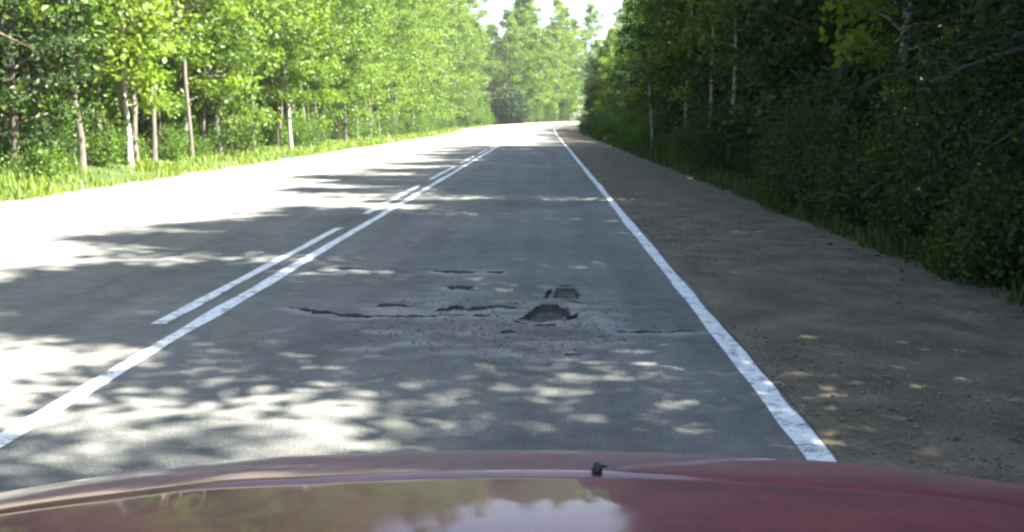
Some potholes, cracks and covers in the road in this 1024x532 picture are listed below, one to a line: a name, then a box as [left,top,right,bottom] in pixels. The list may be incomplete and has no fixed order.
pothole [543,285,583,304]
pothole [512,304,579,326]
crack [288,270,519,334]
